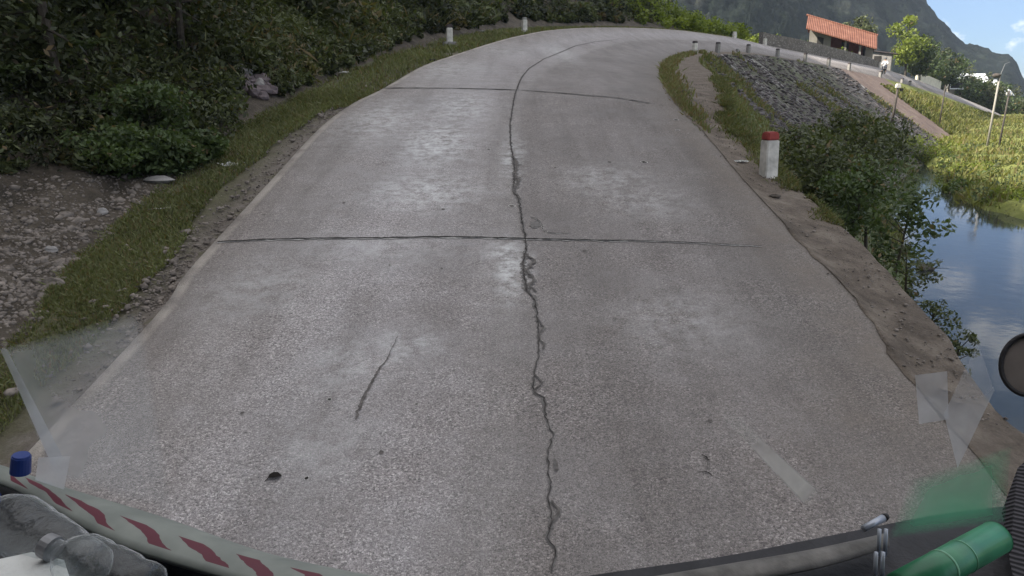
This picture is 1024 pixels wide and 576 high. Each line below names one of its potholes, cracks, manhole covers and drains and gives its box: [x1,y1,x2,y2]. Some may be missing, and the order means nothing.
crack [355,337,397,420]
crack [509,39,616,572]
